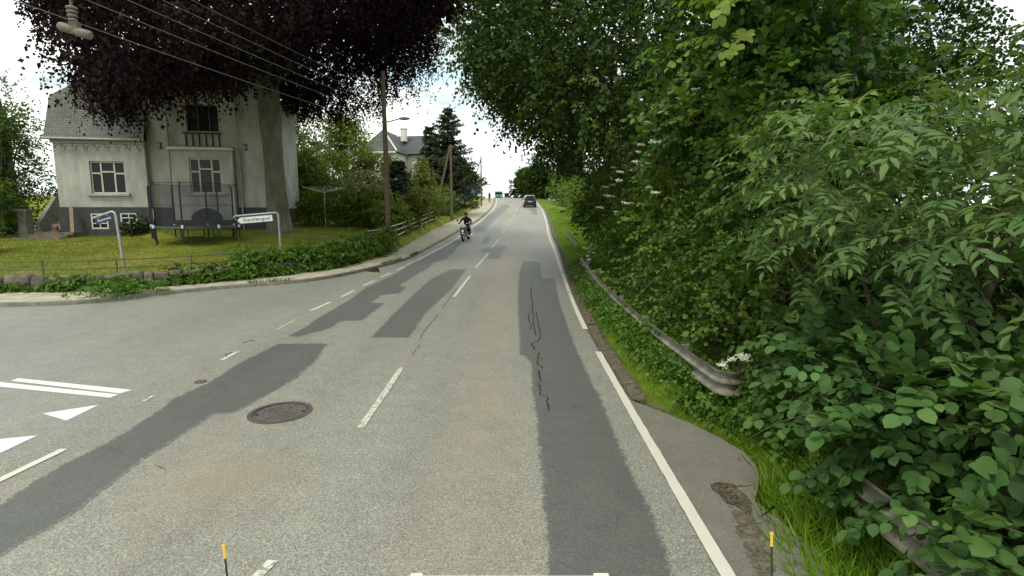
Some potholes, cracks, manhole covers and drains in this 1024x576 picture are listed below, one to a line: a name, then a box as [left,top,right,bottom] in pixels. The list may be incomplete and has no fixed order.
manhole cover [247,401,313,424]
crack [528,287,550,411]
pothole [711,482,752,515]
